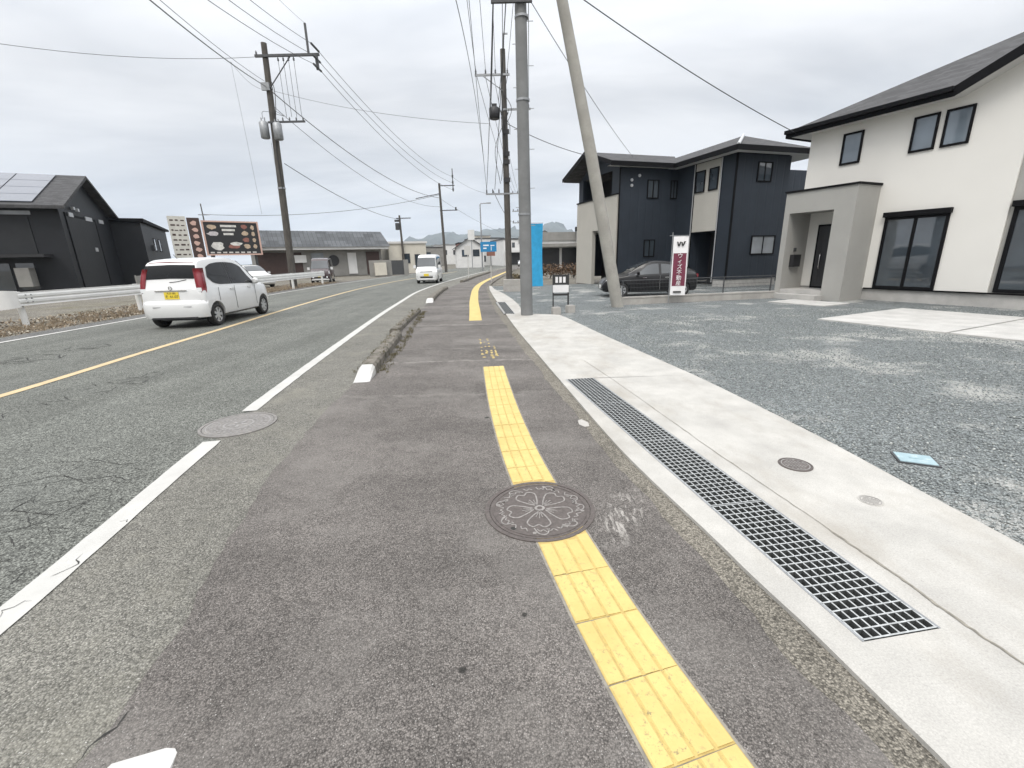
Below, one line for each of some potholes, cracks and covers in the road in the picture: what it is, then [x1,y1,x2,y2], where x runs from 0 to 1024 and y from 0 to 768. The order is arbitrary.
crack [0,455,170,589]
manhole cover [857,495,884,506]
drain grate [566,378,941,642]
manhole cover [778,458,814,472]
manhole cover [485,482,595,542]
manhole cover [197,412,277,439]
